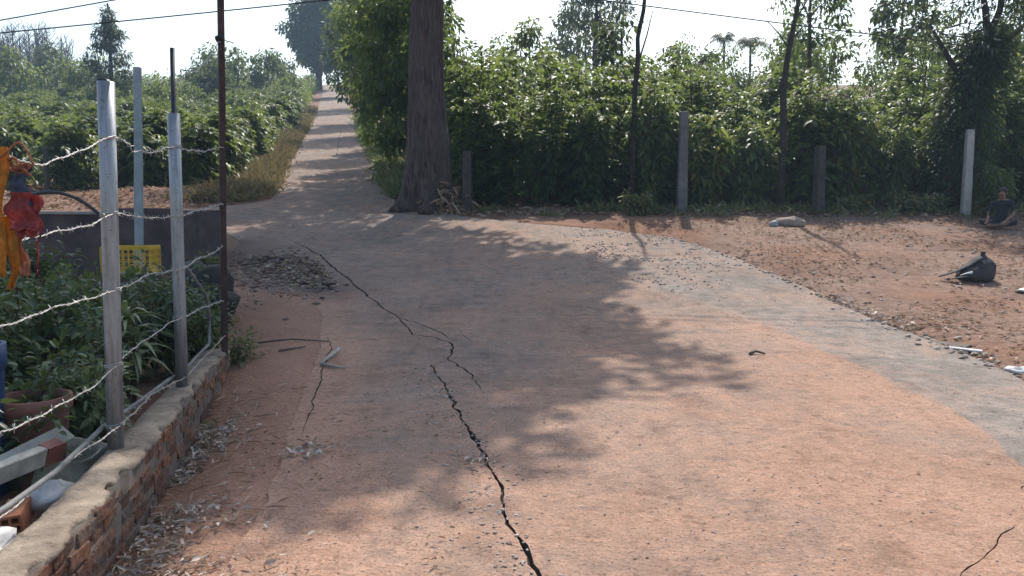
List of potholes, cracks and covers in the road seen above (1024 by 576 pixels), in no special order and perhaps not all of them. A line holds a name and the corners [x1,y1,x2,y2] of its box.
crack [299,244,542,576]
crack [960,526,1015,576]
